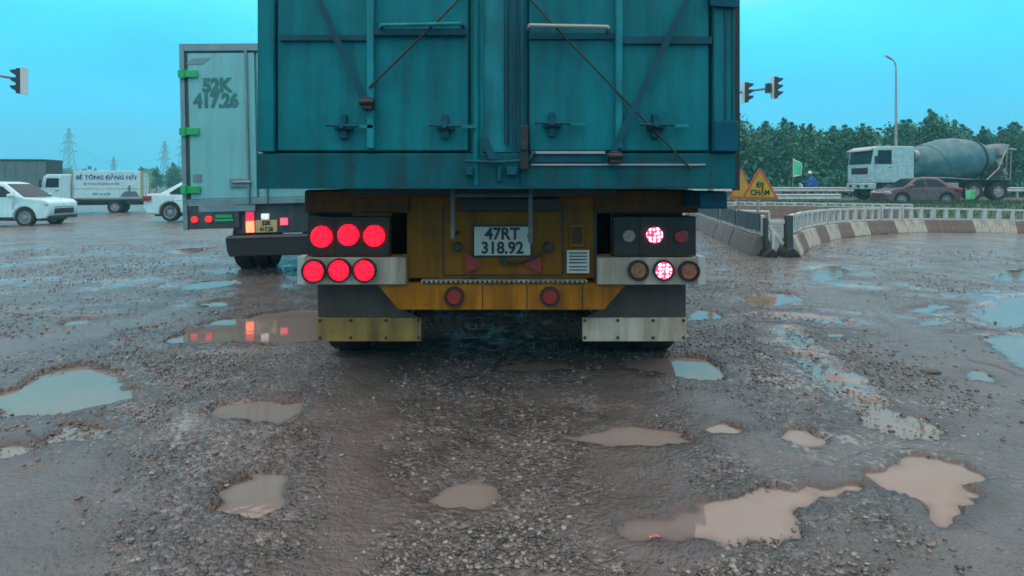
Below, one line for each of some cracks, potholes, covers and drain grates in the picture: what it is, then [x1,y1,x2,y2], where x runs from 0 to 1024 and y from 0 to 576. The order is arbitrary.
pothole [166,454,337,545]
pothole [0,355,178,427]
pothole [678,410,765,446]
pothole [810,393,1005,457]
pothole [131,303,332,354]
pothole [758,413,868,464]
pothole [164,387,337,438]
